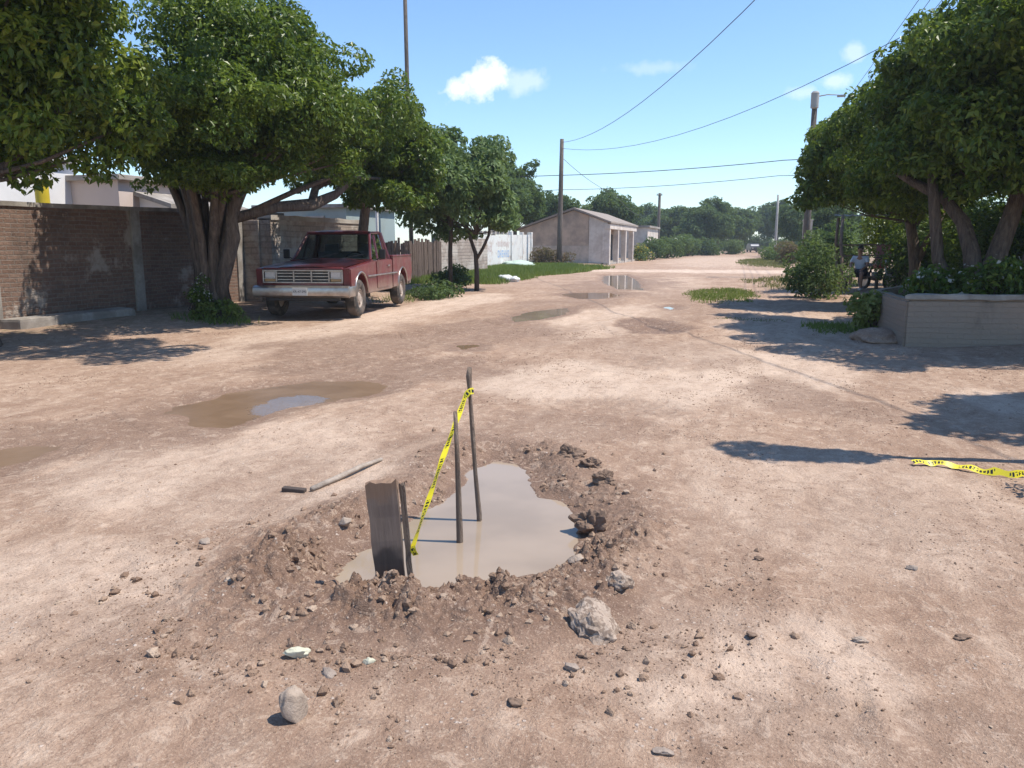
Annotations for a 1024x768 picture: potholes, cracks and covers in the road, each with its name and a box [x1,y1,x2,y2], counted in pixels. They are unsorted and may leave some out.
pothole [111,372,436,437]
pothole [171,427,721,653]
pothole [483,303,591,326]
